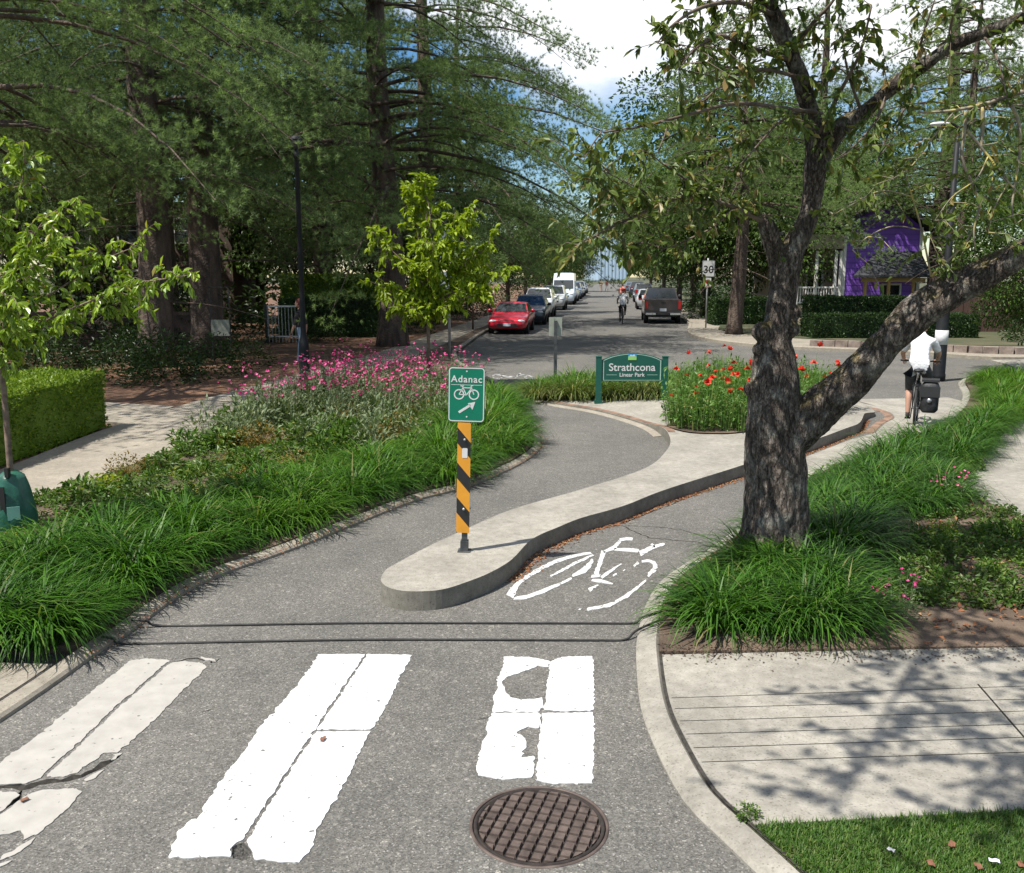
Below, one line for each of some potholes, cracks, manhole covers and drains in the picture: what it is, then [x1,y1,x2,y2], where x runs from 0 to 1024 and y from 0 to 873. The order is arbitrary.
manhole cover [469,786,609,869]
crack [622,483,725,542]
crack [0,755,121,809]
pothole [232,843,251,861]
